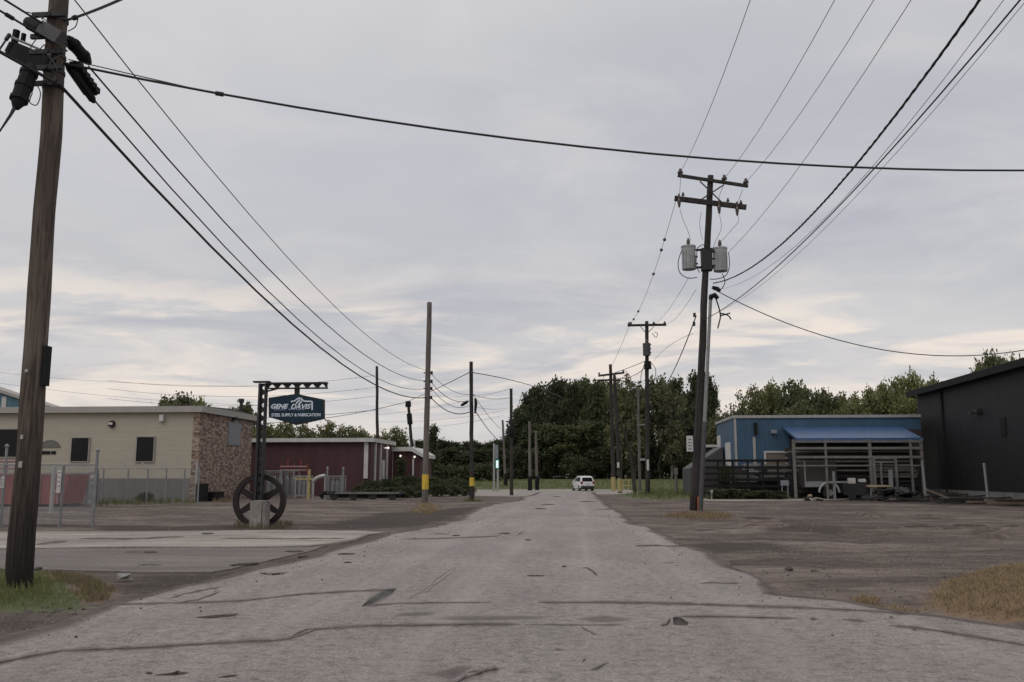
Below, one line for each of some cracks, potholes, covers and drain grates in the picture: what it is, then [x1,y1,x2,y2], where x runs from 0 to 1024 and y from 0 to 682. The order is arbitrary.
crack [115,565,491,606]
crack [0,601,1024,682]
